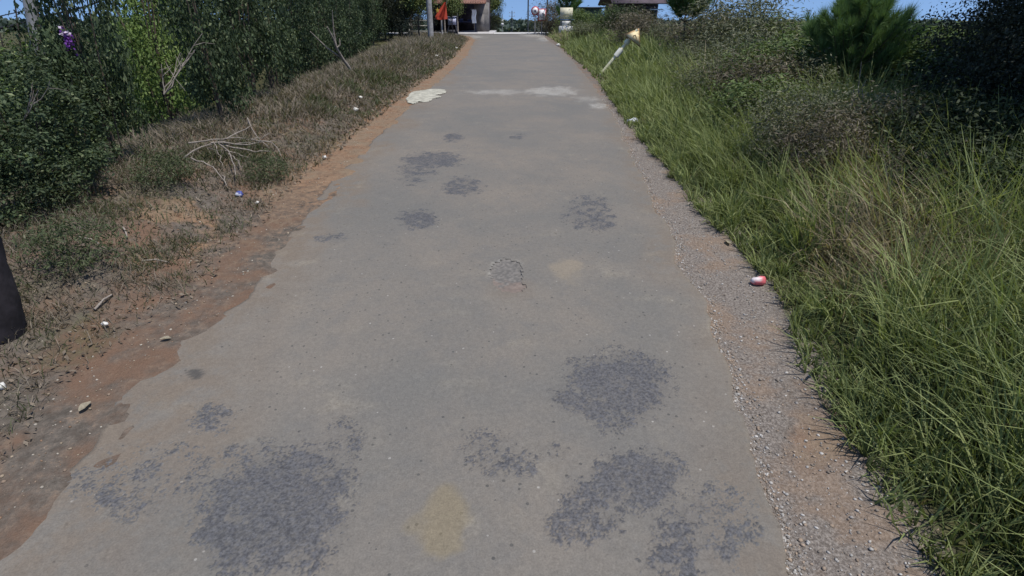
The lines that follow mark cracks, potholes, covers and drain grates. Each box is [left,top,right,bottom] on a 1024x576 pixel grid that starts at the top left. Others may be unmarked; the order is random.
pothole [488,258,527,293]
